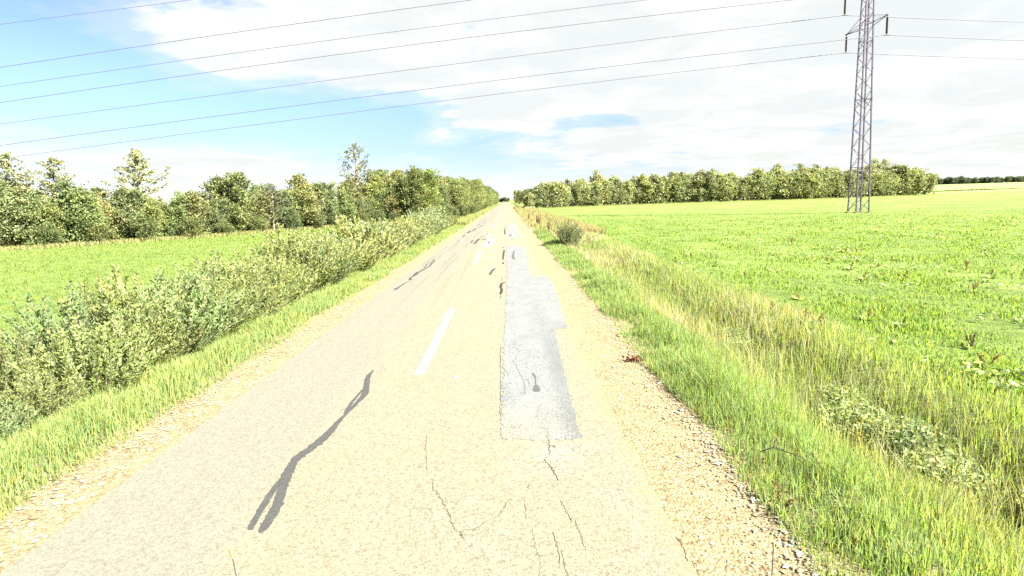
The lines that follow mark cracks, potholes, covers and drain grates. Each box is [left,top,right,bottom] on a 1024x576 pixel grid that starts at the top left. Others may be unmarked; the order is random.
crack [425,436,586,576]
crack [504,342,557,476]
